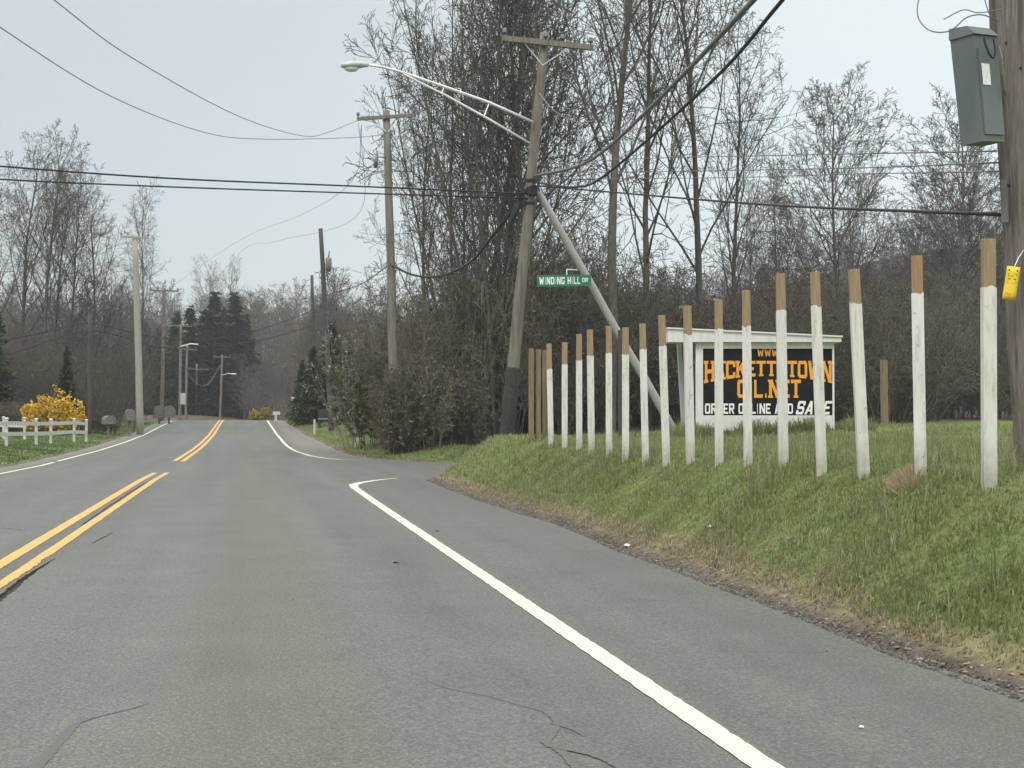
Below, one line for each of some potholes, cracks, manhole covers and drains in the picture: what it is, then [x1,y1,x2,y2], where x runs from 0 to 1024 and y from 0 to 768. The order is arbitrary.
crack [0,558,56,602]
crack [81,481,148,543]
